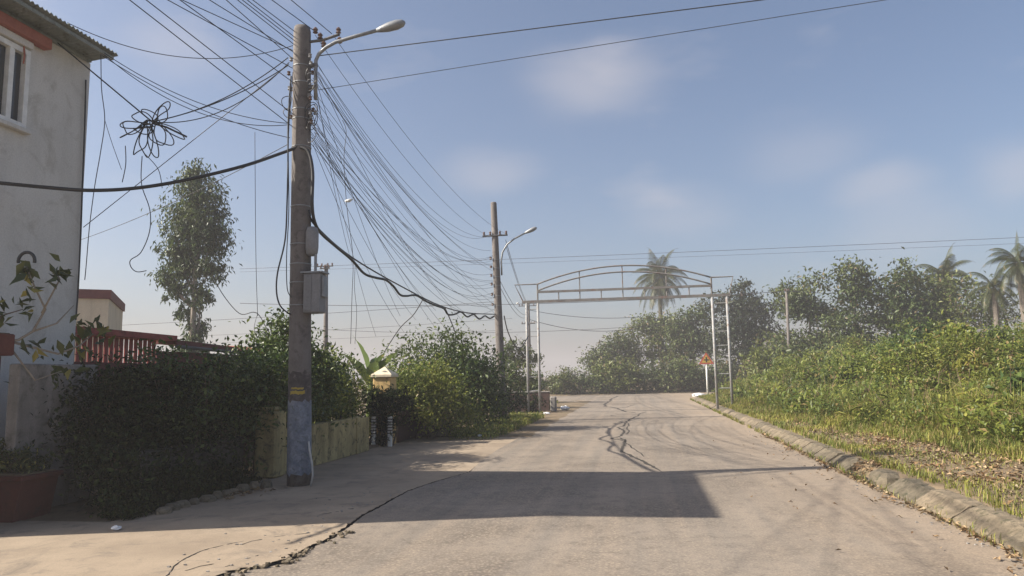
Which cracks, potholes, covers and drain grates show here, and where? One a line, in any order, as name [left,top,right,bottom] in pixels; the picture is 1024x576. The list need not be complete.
crack [166,470,471,576]
